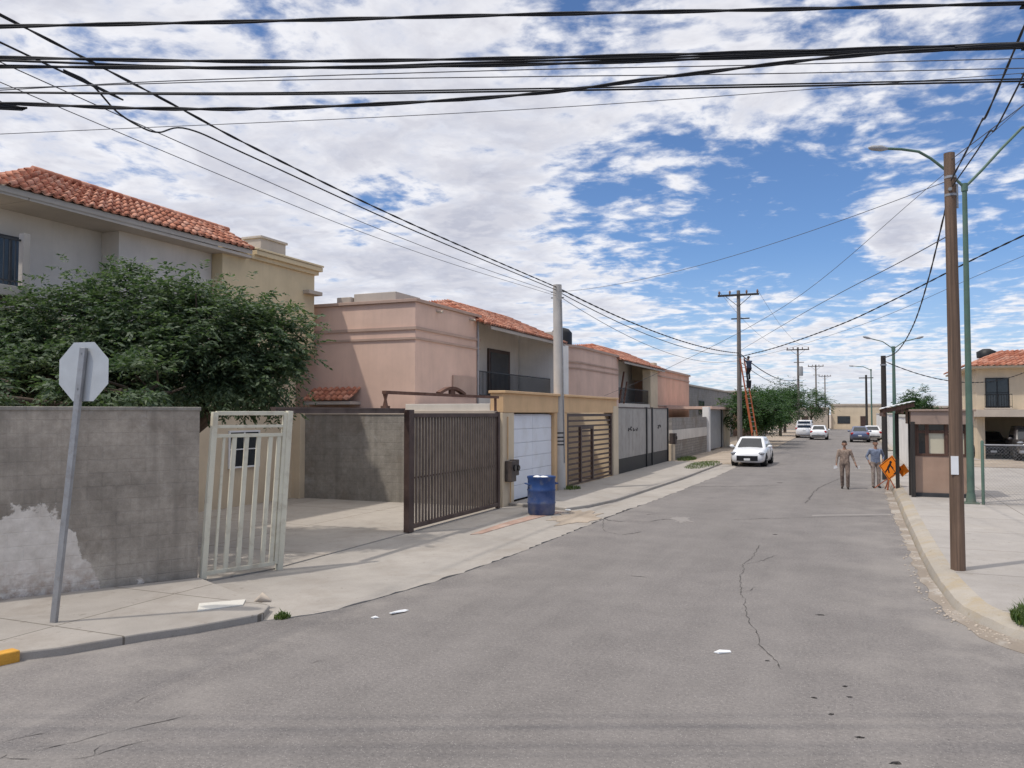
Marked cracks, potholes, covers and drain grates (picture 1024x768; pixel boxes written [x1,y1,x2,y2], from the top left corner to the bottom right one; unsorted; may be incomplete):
crack [739,546,794,669]
crack [1,717,179,759]
